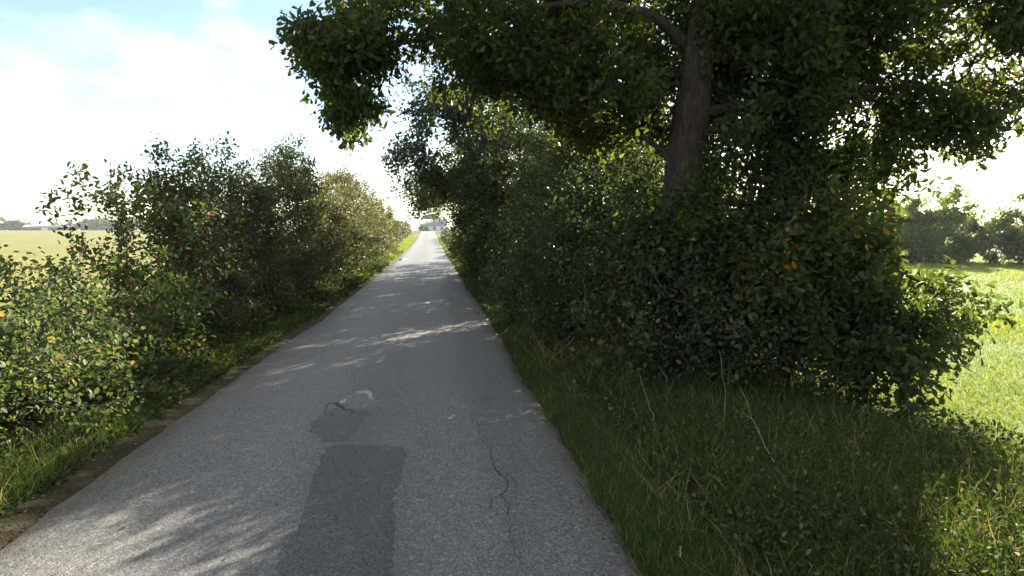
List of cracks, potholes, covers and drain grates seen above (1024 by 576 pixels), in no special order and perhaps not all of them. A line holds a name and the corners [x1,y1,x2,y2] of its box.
crack [469,398,522,568]
